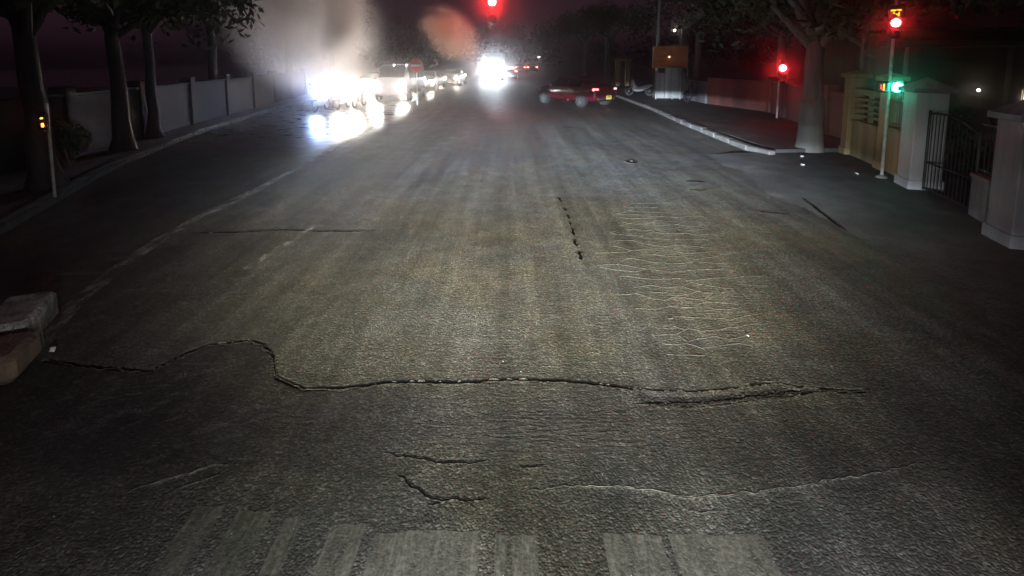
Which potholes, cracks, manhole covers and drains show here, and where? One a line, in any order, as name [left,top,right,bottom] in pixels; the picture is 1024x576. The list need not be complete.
crack [49,337,870,410]
crack [384,453,917,514]
crack [129,464,228,492]
crack [557,198,584,261]
